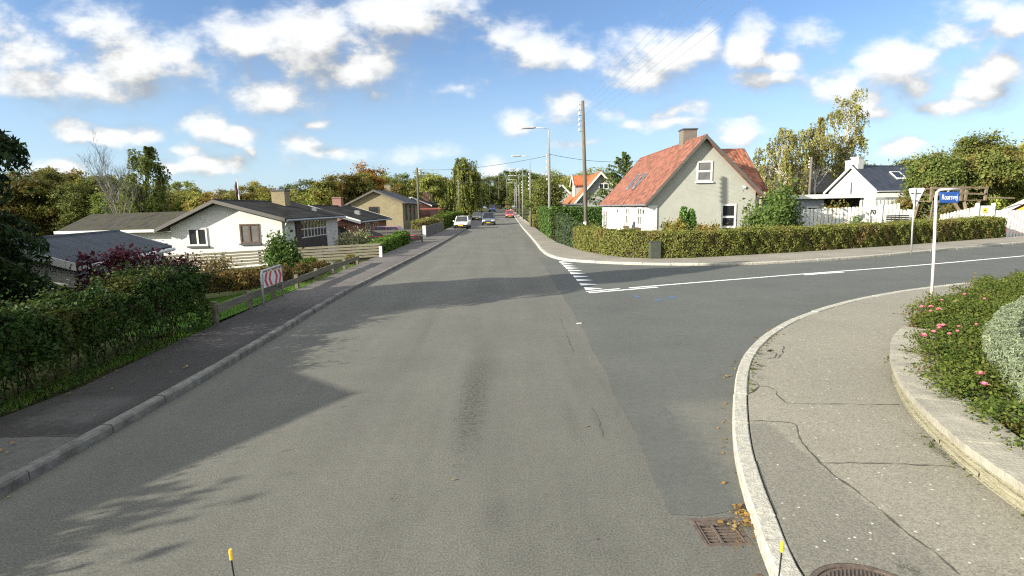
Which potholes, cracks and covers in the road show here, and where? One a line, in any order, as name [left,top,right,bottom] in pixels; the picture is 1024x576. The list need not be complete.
crack [748,381,897,405]
manhole cover [810,563,897,576]
drain grate [689,517,755,547]
